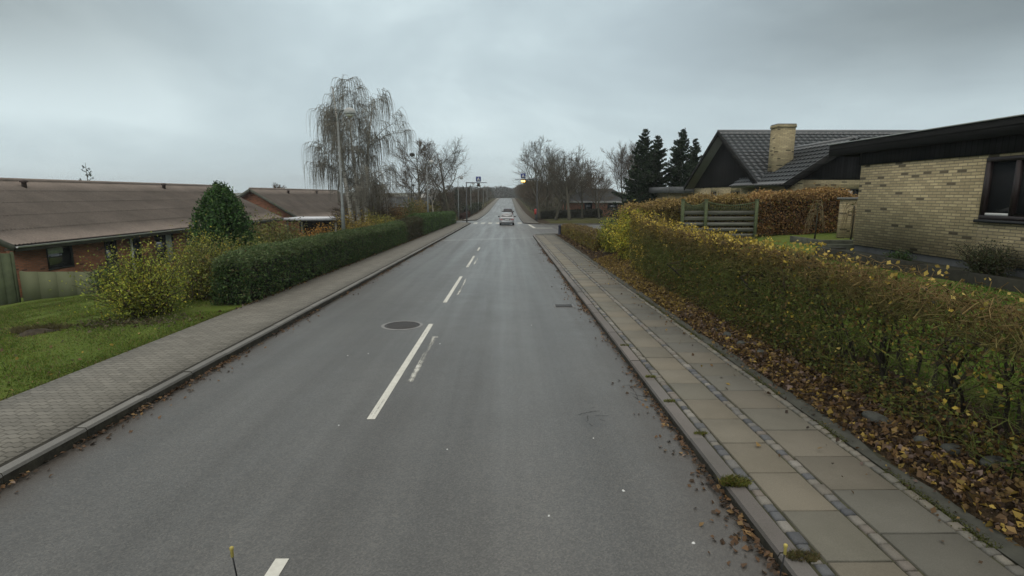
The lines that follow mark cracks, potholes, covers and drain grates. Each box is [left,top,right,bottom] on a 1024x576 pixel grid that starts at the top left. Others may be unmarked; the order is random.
manhole cover [381,321,423,330]
